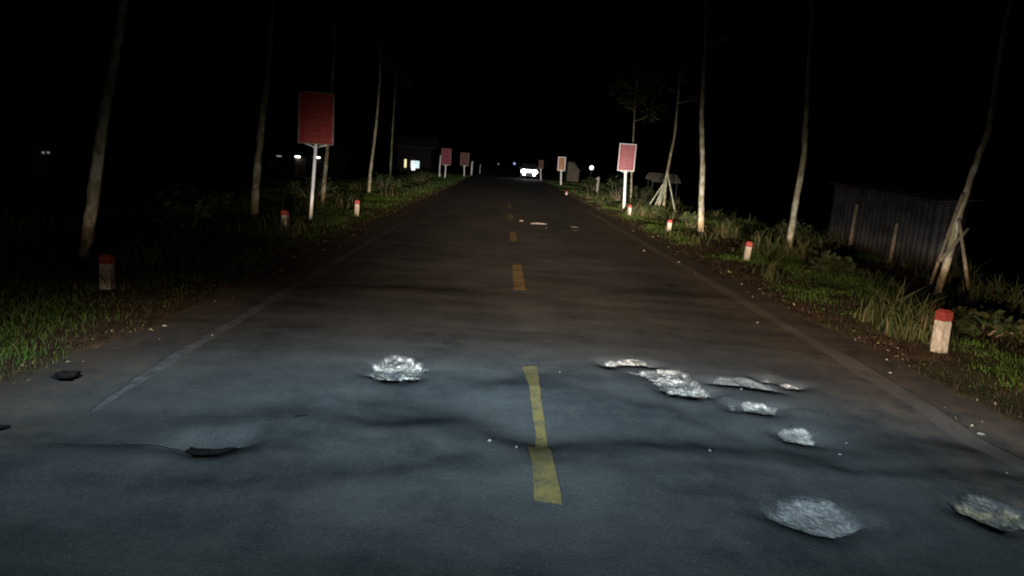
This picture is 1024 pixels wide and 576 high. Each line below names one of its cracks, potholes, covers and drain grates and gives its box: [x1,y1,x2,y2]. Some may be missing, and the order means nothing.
pothole [367,355,429,383]
pothole [739,401,778,416]
pothole [601,359,655,369]
pothole [185,446,240,457]
pothole [627,369,712,400]
pothole [759,494,867,540]
pothole [708,377,780,394]
pothole [775,425,817,447]
pothole [946,492,1024,534]
pothole [51,370,84,381]
